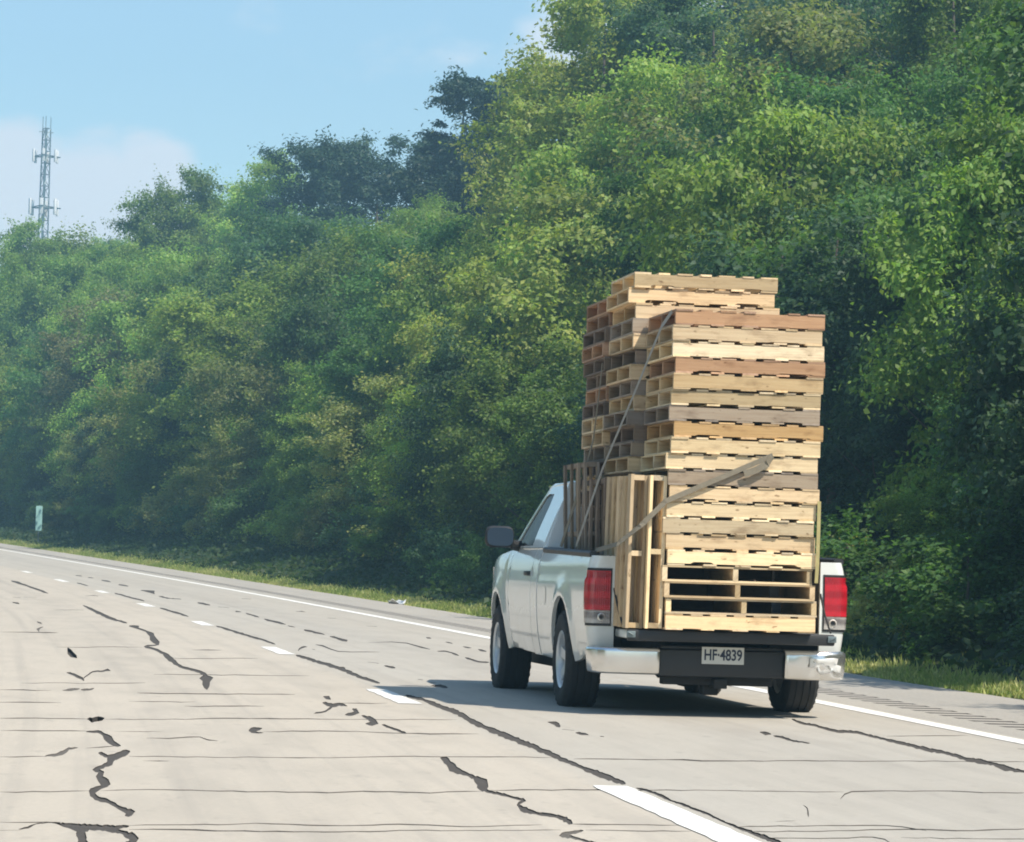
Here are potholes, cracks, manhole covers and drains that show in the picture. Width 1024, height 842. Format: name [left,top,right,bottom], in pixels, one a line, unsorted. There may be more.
crack [0,575,1024,842]
